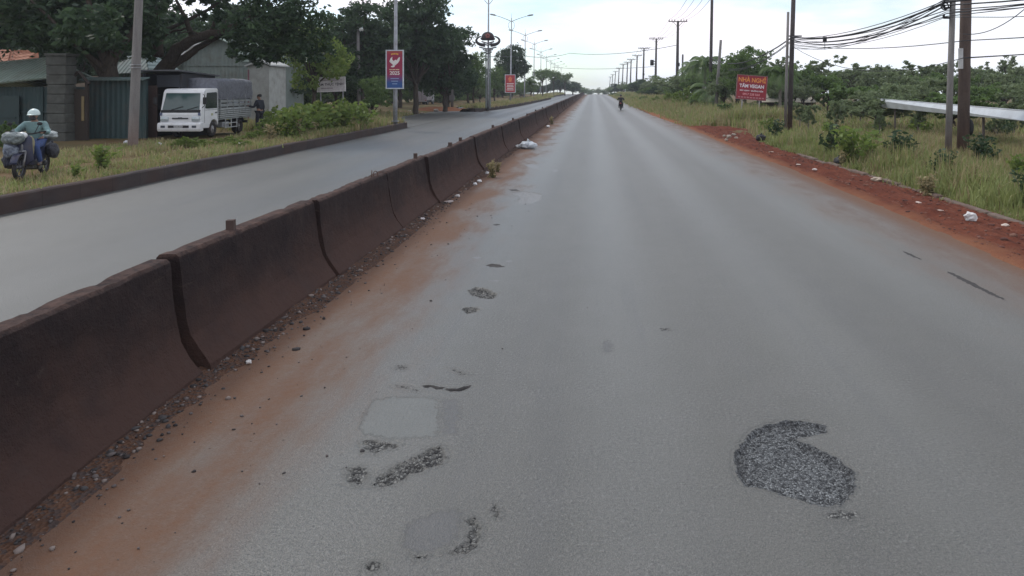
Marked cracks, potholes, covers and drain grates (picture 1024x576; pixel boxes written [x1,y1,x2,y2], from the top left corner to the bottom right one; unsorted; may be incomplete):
pothole [731,419,861,510]
pothole [362,443,451,491]
pothole [356,438,408,457]
pothole [339,463,376,490]
pothole [458,306,484,315]
pothole [464,287,500,300]
